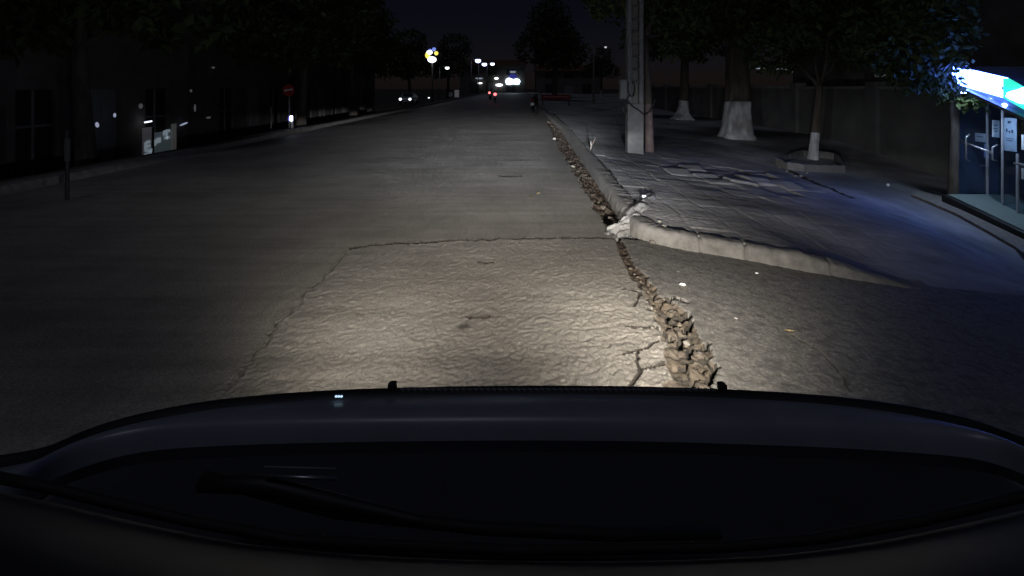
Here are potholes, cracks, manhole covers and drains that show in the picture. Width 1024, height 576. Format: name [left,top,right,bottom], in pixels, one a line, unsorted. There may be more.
crack [622,289,643,307]
crack [791,335,854,392]
crack [622,325,665,386]
